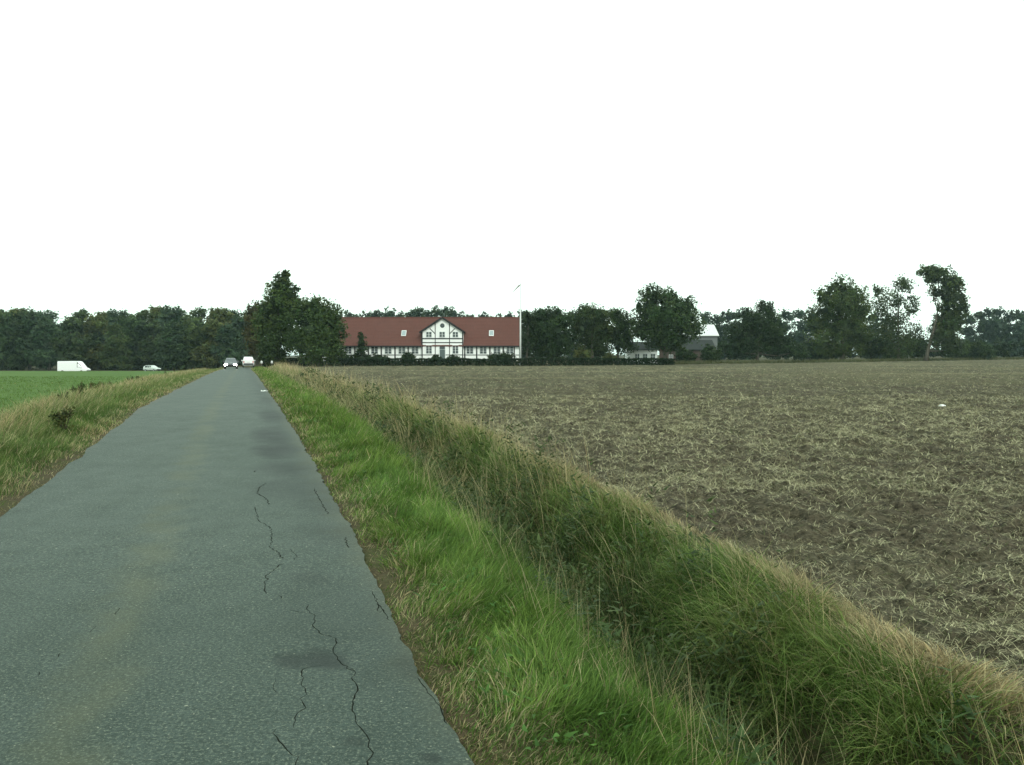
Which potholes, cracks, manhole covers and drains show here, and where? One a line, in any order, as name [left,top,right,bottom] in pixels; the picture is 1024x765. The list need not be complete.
crack [254,471,374,765]
